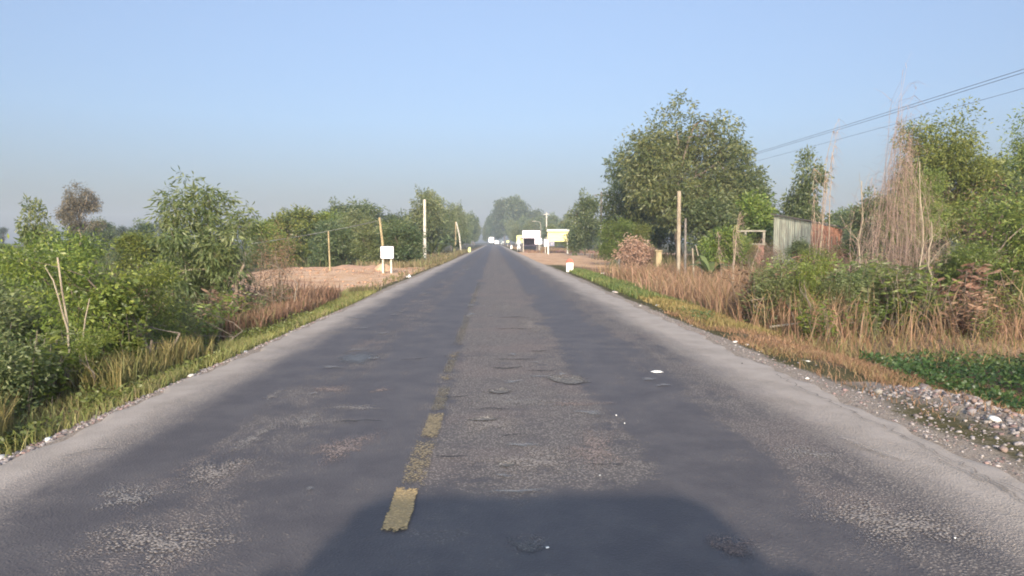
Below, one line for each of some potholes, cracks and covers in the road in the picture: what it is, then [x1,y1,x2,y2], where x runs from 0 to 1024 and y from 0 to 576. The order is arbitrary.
pothole [506,537,544,551]
pothole [707,537,752,558]
pothole [548,375,589,384]
